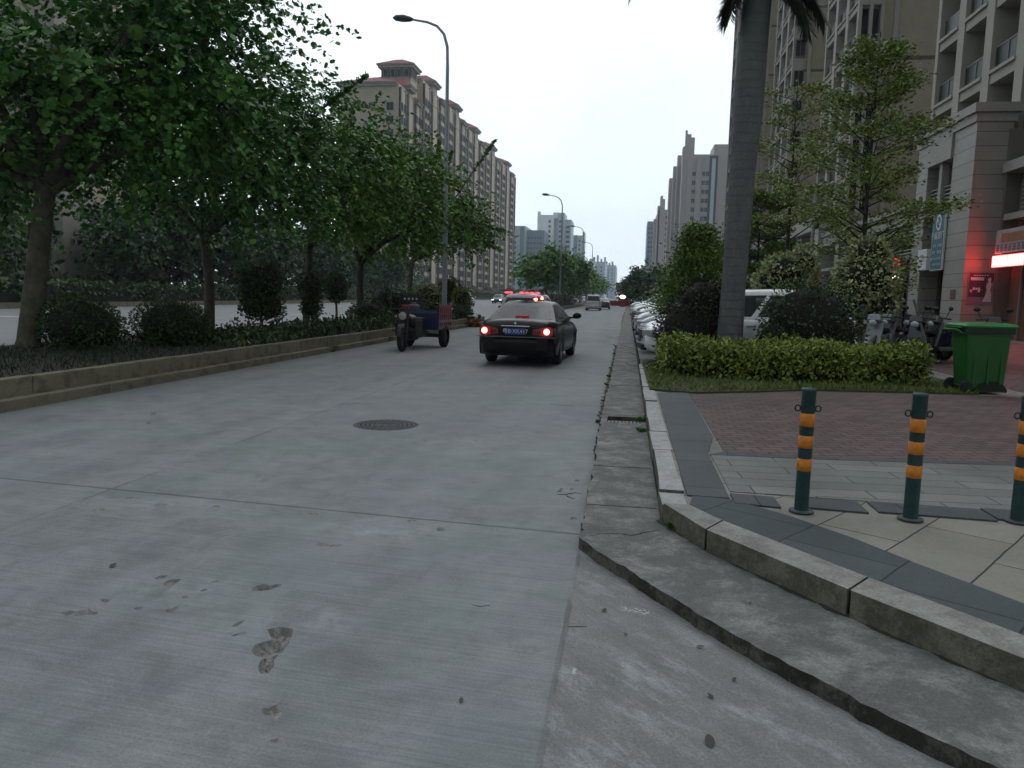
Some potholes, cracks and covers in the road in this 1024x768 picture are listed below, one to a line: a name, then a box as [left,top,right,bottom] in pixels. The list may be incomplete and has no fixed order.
manhole cover [353,419,419,431]
